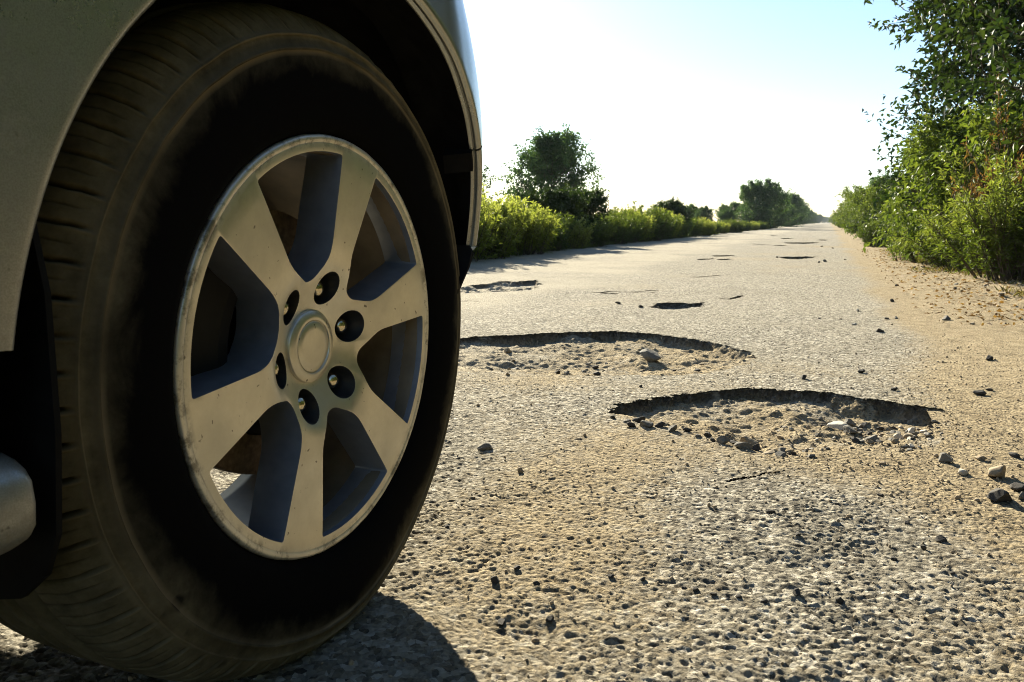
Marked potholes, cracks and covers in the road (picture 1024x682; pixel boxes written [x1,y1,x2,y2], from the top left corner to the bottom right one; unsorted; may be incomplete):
pothole [607,388,957,457]
pothole [649,302,706,310]
pothole [457,331,758,377]
pothole [460,280,543,293]
